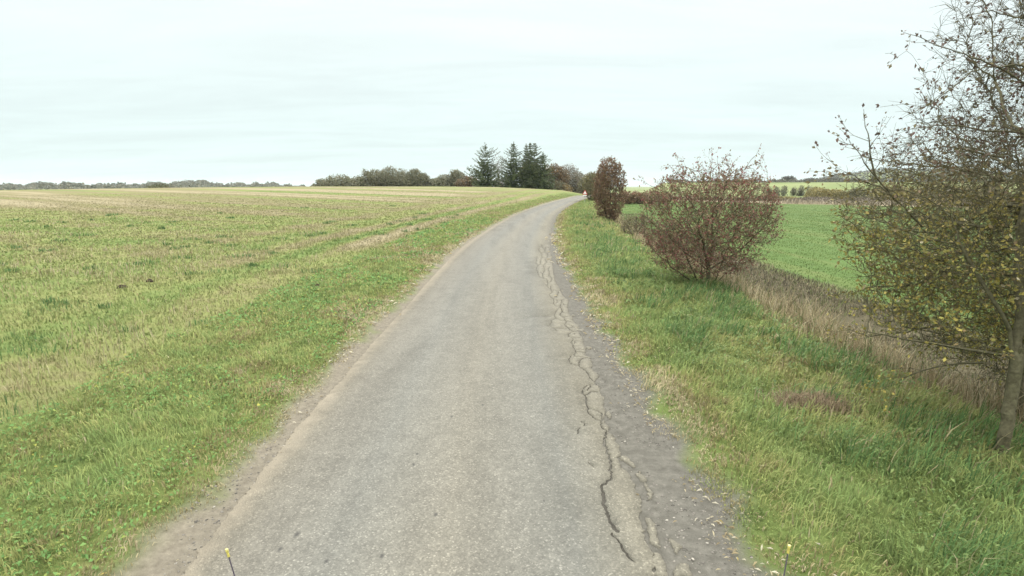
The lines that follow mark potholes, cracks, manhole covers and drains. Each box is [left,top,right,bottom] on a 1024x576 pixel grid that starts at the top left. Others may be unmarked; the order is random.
crack [535,255,634,562]
